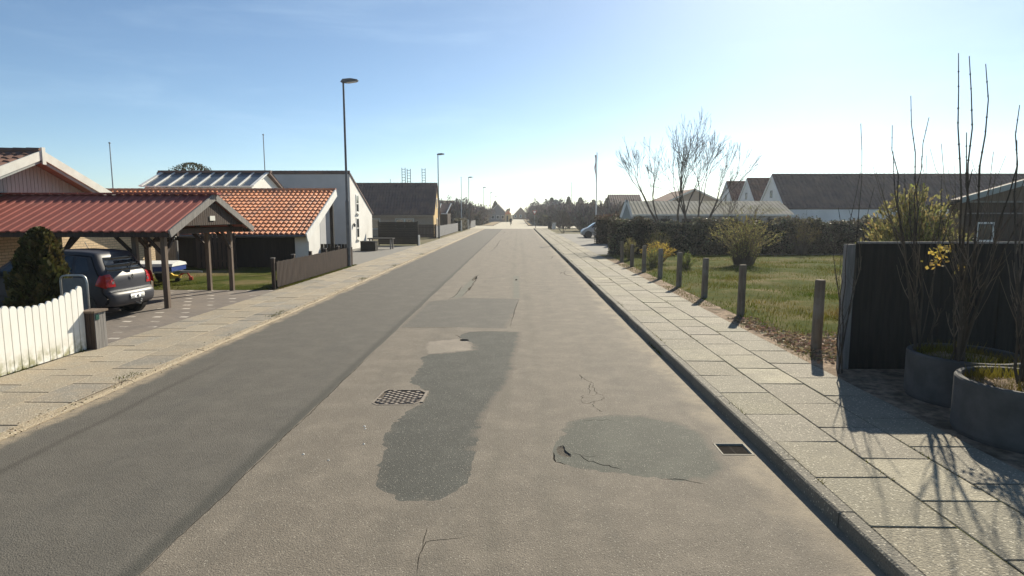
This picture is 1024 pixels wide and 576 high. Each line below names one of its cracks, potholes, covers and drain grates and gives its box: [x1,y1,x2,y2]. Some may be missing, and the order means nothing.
crack [553,453,622,470]
pothole [556,445,571,457]
drain grate [713,443,755,455]
manhole cover [372,389,429,405]
crack [417,530,466,569]
